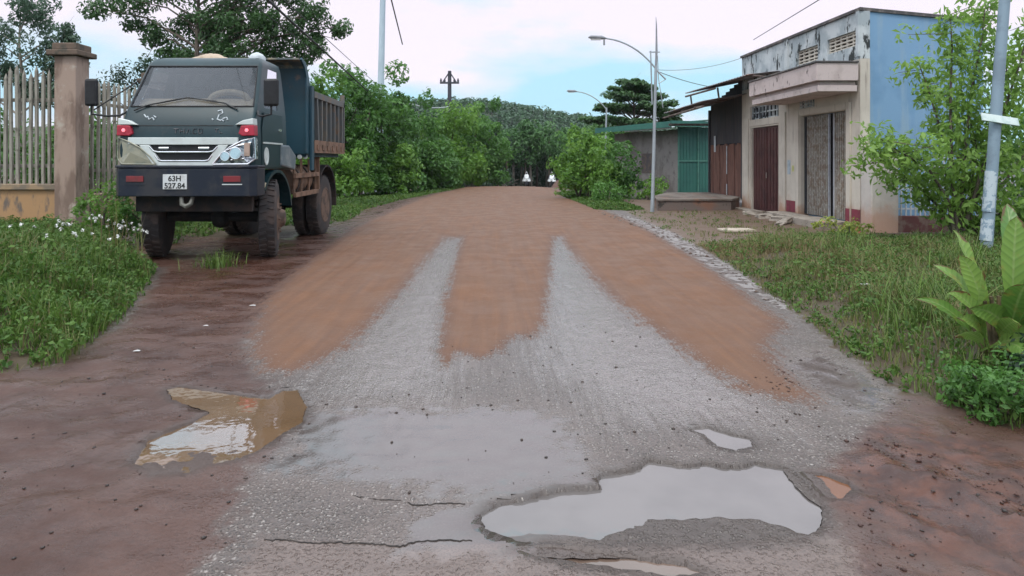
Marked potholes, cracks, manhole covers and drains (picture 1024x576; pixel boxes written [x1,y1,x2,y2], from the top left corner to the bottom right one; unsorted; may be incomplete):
crack [264,538,472,547]
pothole [118,382,320,481]
pothole [469,455,838,559]
pothole [679,423,763,453]
crack [353,495,465,506]
